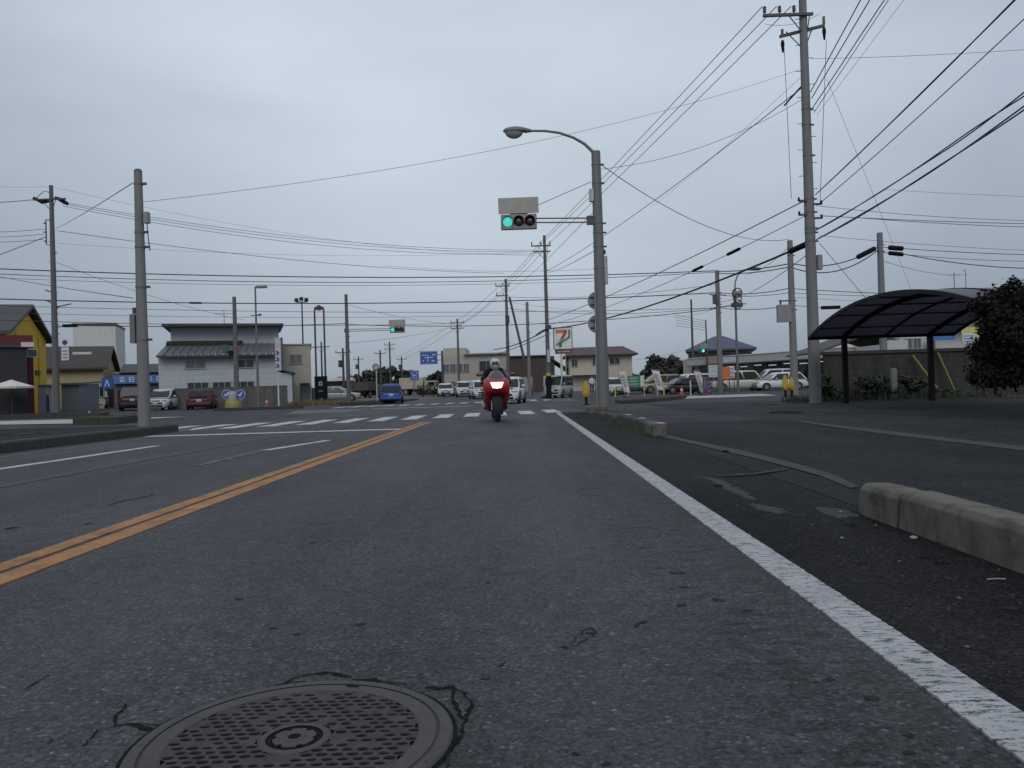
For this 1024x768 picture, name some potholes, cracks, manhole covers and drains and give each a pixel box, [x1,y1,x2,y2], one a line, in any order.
crack [563,627,597,649]
crack [426,662,505,768]
manhole cover [115,680,457,768]
crack [80,692,183,747]
